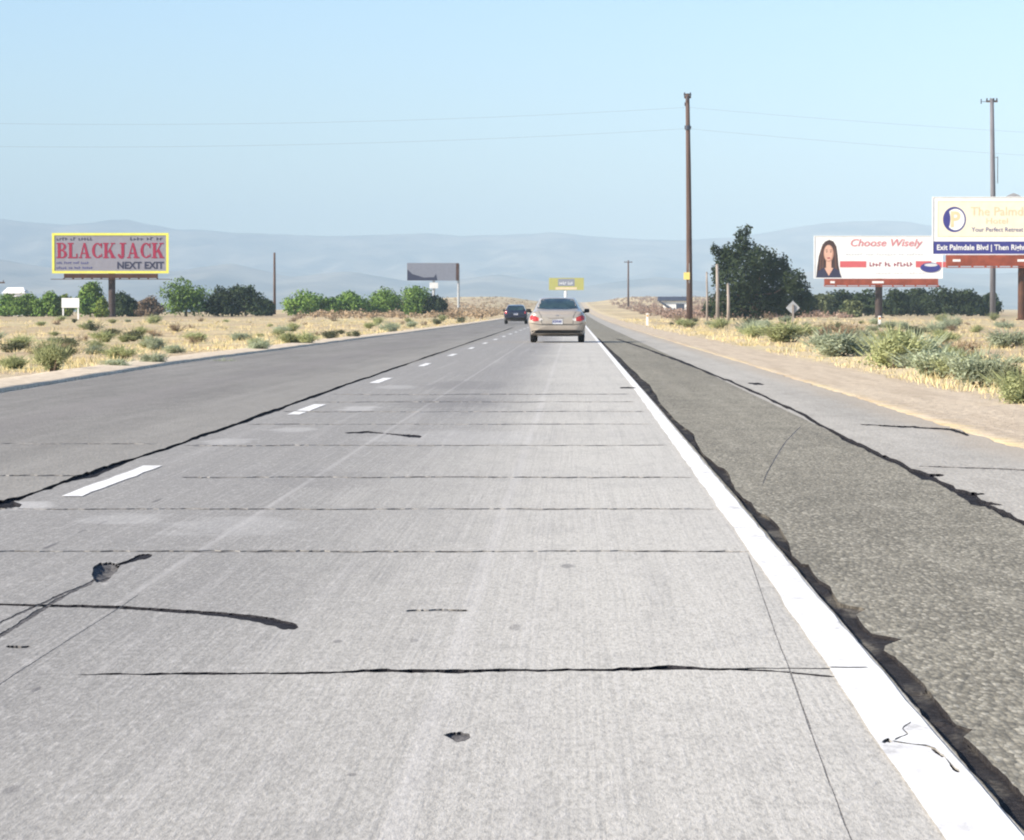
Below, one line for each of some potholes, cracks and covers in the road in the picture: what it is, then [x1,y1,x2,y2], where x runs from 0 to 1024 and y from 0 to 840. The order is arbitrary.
pothole [444,732,471,742]
pothole [92,562,119,583]
crack [0,327,1024,840]
